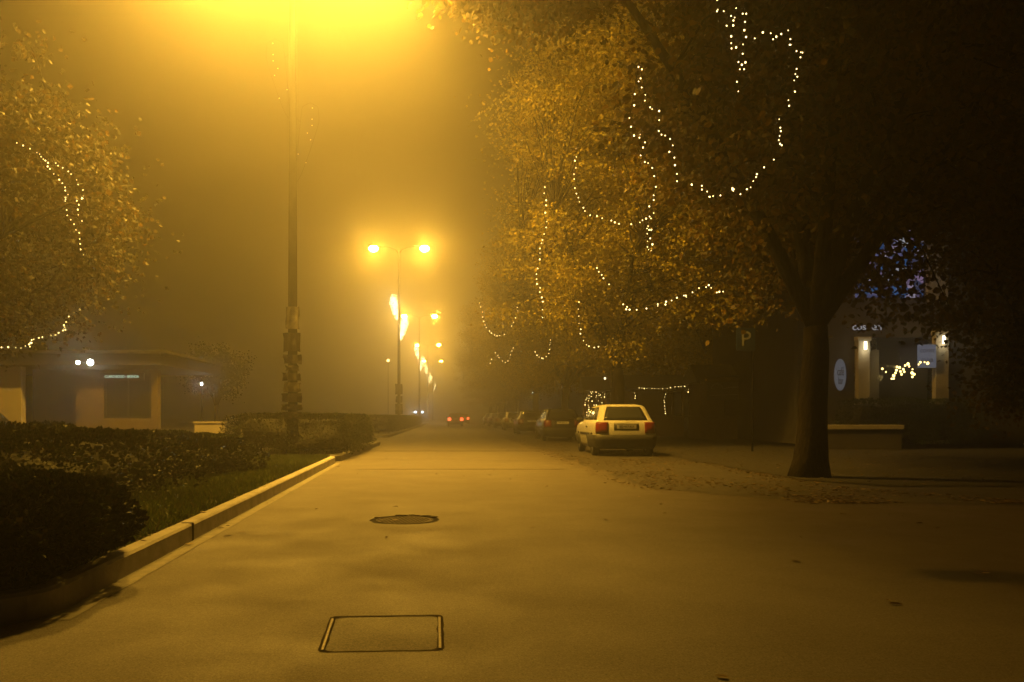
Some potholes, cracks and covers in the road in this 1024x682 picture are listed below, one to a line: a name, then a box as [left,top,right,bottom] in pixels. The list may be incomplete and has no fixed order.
manhole cover [318,615,445,653]
manhole cover [369,514,439,525]
